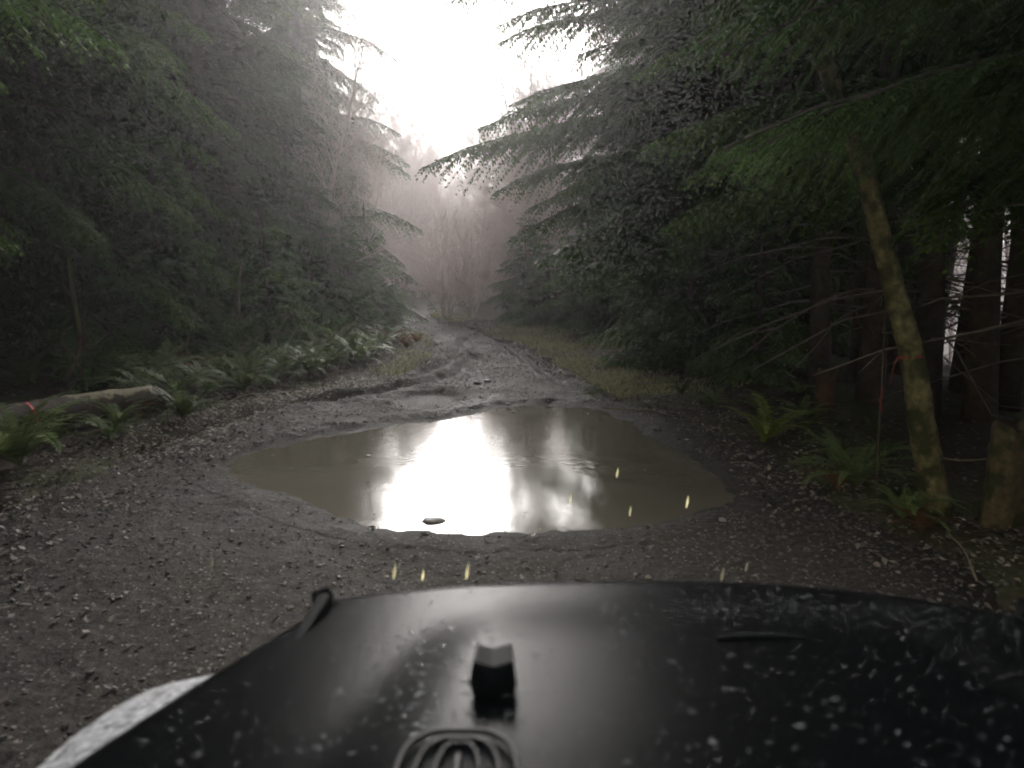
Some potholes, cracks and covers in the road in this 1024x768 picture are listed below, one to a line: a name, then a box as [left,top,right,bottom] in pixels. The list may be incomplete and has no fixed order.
pothole [178,396,789,555]
